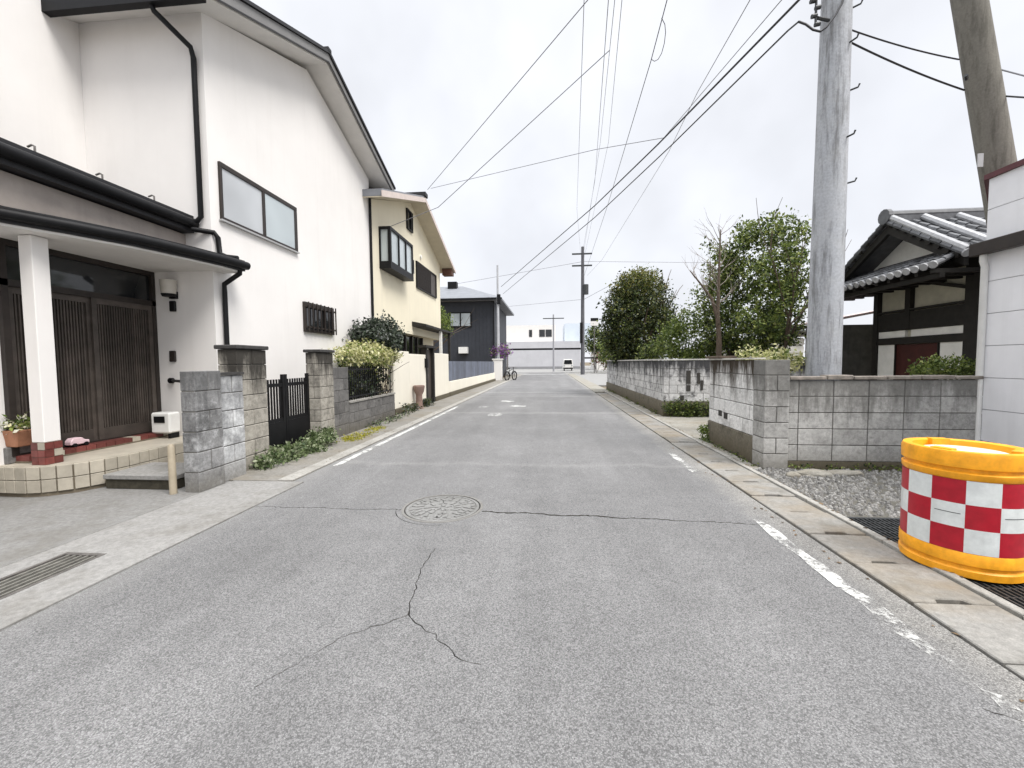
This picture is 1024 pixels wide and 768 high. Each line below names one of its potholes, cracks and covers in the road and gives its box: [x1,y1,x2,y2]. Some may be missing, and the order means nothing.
manhole cover [401,494,483,525]
drain grate [847,517,1024,609]
crack [482,511,755,525]
crack [258,549,481,686]
drain grate [0,552,105,600]
